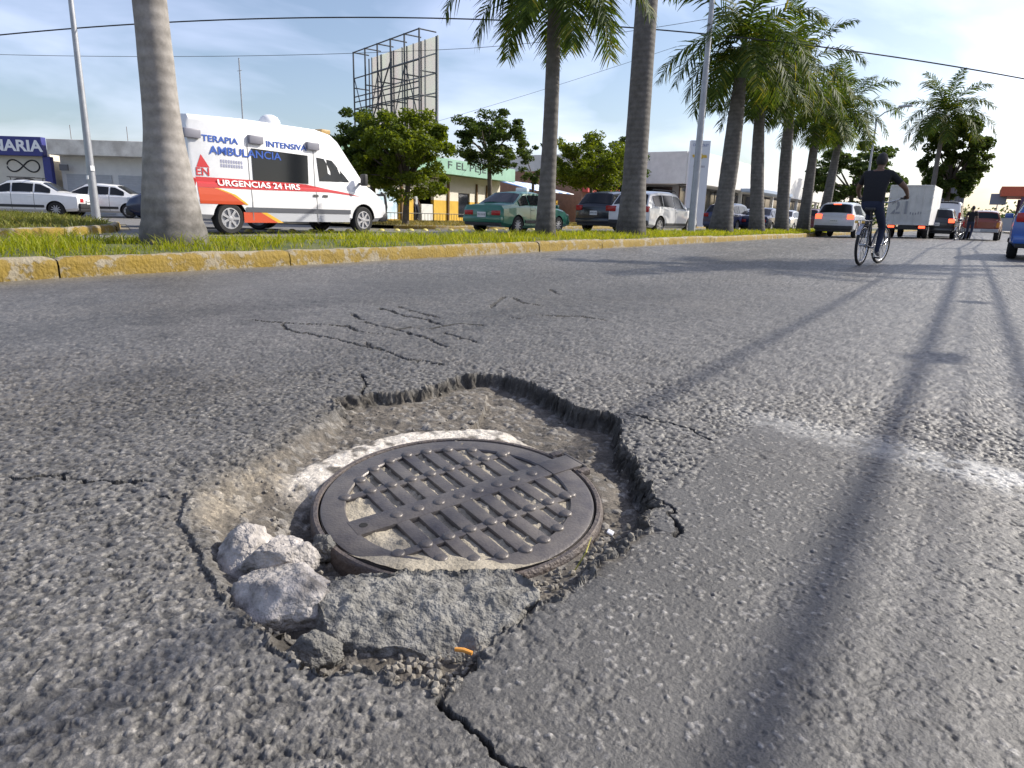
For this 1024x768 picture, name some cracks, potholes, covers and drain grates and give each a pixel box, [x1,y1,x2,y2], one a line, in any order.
crack [435,697,527,768]
crack [9,472,170,499]
manhole cover [310,438,603,579]
pothole [179,372,665,708]
crack [255,306,482,366]
crack [626,413,711,441]
crack [490,289,606,321]
